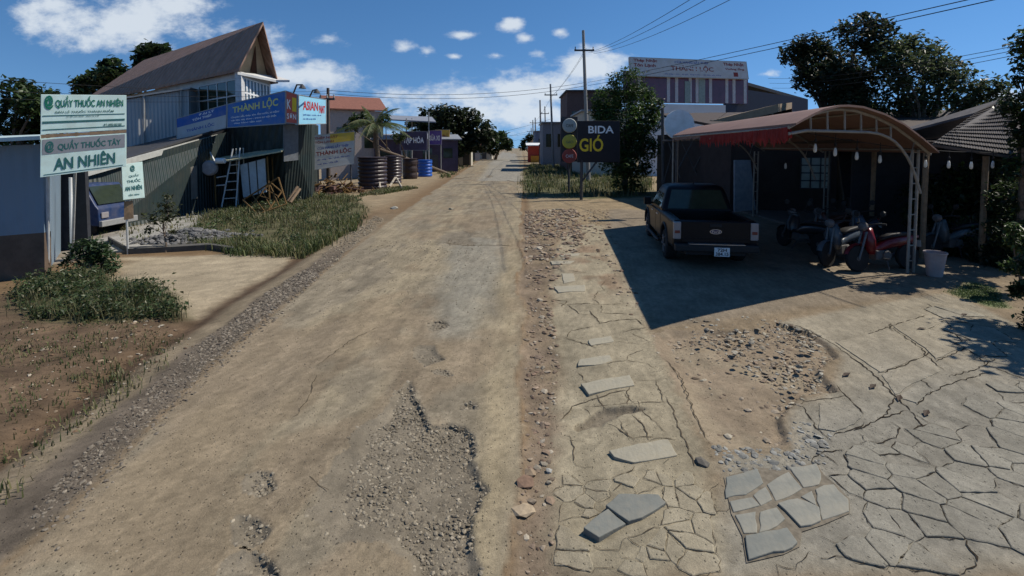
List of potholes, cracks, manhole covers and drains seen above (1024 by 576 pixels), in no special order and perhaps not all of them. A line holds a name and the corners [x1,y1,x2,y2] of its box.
pothole [220,462,295,506]
pothole [284,375,510,576]
pothole [637,318,859,469]
pothole [410,315,467,338]
crack [551,271,1024,576]
pothole [396,340,462,375]
pothole [196,543,300,576]
pothole [208,505,291,555]
